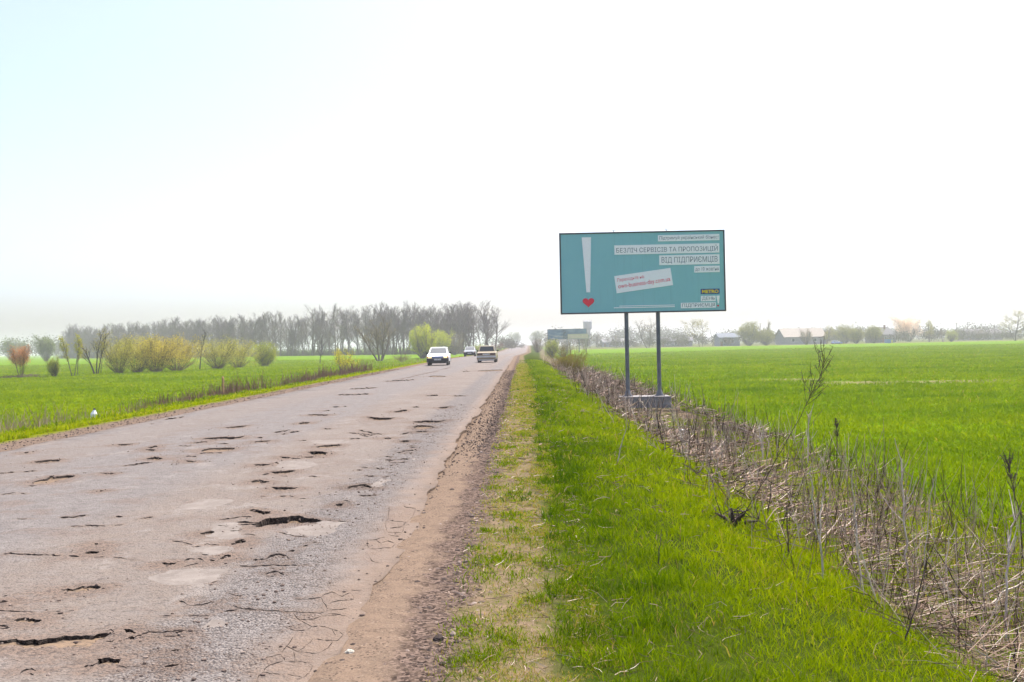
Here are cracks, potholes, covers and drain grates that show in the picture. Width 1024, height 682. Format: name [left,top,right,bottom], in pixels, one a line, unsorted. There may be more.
crack [134,581,361,679]
pothole [32,475,74,484]
crack [344,495,415,563]
pothole [254,515,321,527]
pothole [97,657,121,665]
